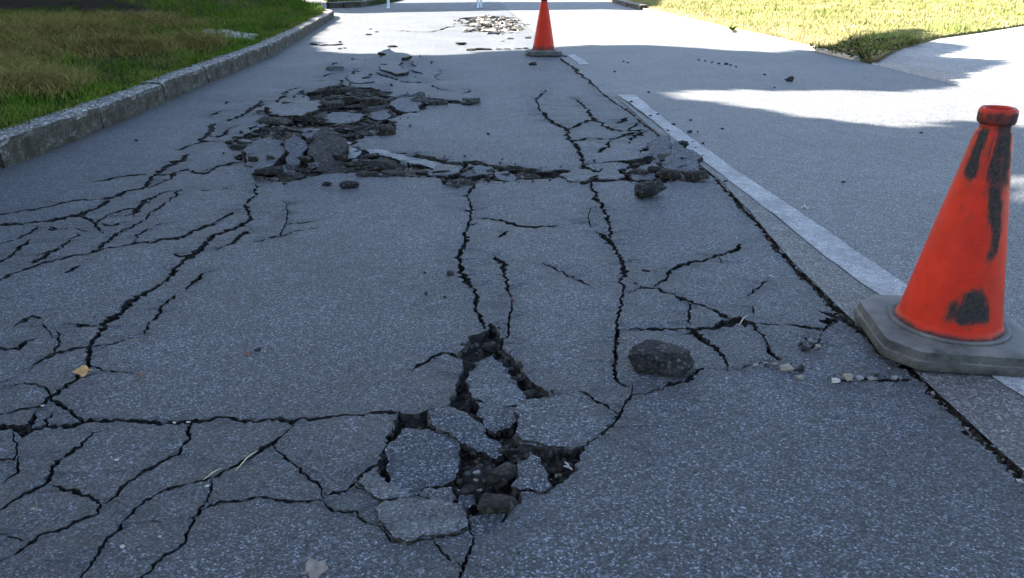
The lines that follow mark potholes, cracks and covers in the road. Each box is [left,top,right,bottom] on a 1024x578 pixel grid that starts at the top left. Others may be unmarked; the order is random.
pothole [376,323,585,540]
pothole [581,156,715,186]
pothole [224,84,569,188]
crack [454,185,558,345]
pothole [456,16,531,35]
crack [533,90,853,446]
crack [0,57,475,578]
